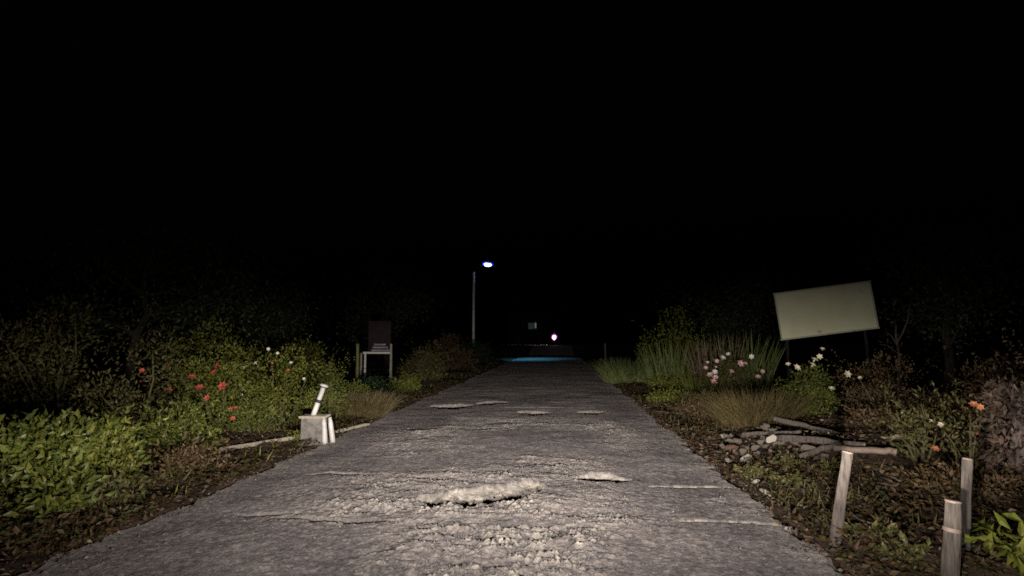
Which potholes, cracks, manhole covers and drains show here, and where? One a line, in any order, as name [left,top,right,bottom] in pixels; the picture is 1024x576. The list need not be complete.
pothole [417,478,547,509]
pothole [572,472,632,483]
crack [233,511,404,524]
